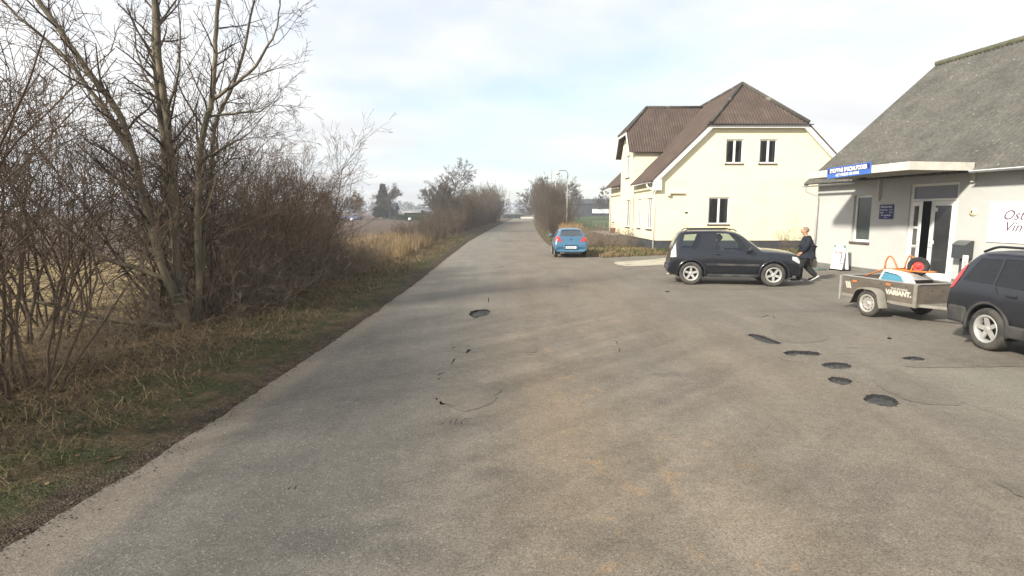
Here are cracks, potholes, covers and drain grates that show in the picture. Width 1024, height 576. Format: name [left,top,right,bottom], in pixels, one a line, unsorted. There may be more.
pothole [860,391,909,409]
pothole [469,308,492,320]
pothole [828,375,858,386]
pothole [747,333,785,345]
pothole [816,361,858,370]
